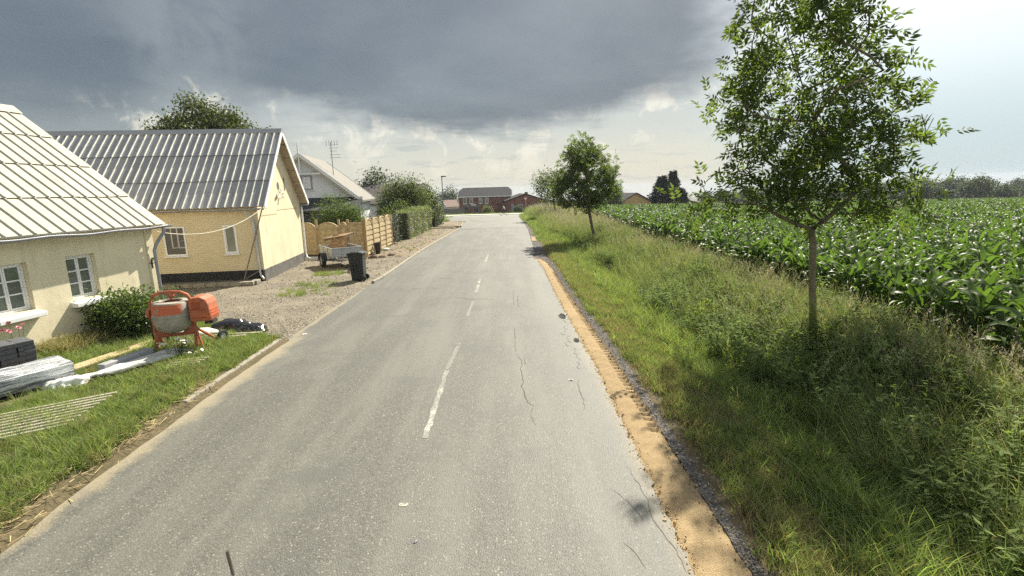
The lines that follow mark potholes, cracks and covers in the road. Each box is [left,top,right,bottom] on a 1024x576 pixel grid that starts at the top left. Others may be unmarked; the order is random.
crack [613,468,685,569]
